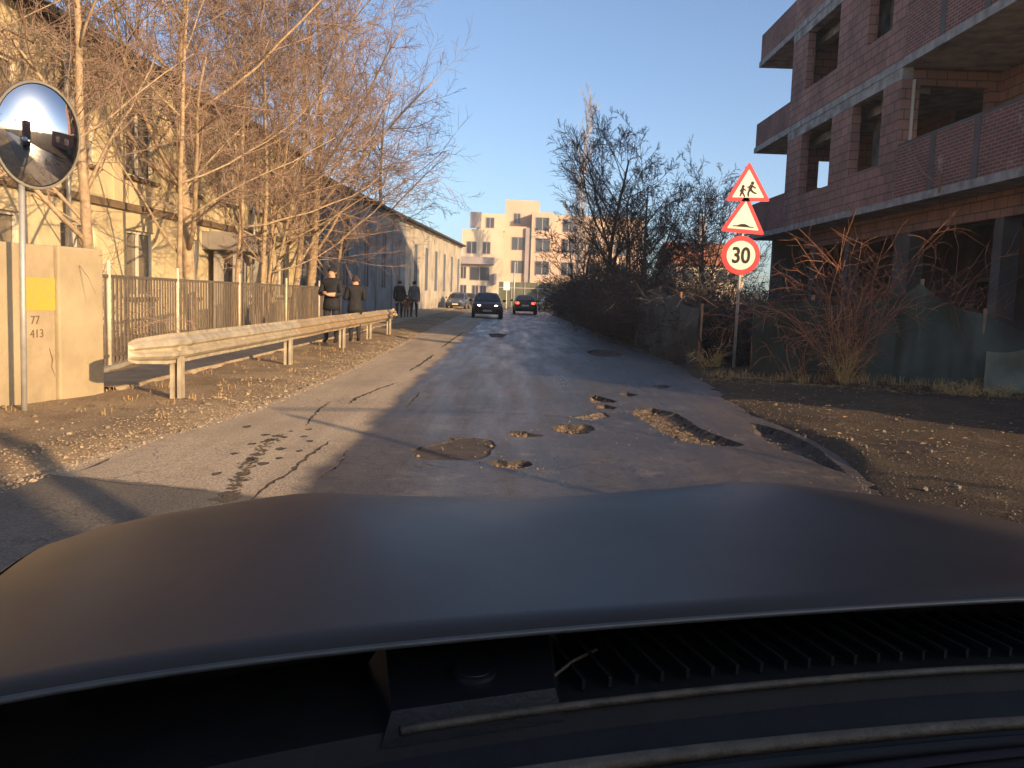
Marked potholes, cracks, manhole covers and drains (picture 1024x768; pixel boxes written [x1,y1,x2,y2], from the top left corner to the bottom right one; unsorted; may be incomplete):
pothole [566,411,615,421]
crack [251,402,347,500]
pothole [553,421,598,434]
pothole [750,423,857,475]
pothole [621,406,744,447]
crack [349,332,464,408]
pothole [580,393,621,405]
pothole [474,456,544,474]
pothole [507,429,557,439]
